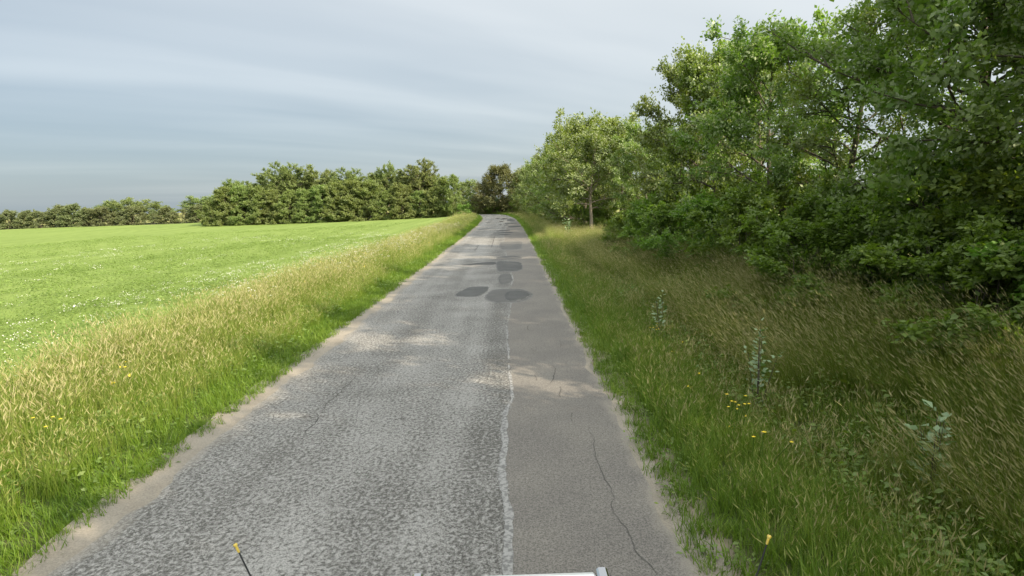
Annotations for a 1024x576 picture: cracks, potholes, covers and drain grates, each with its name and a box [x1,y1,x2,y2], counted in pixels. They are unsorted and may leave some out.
crack [588,425,658,576]
